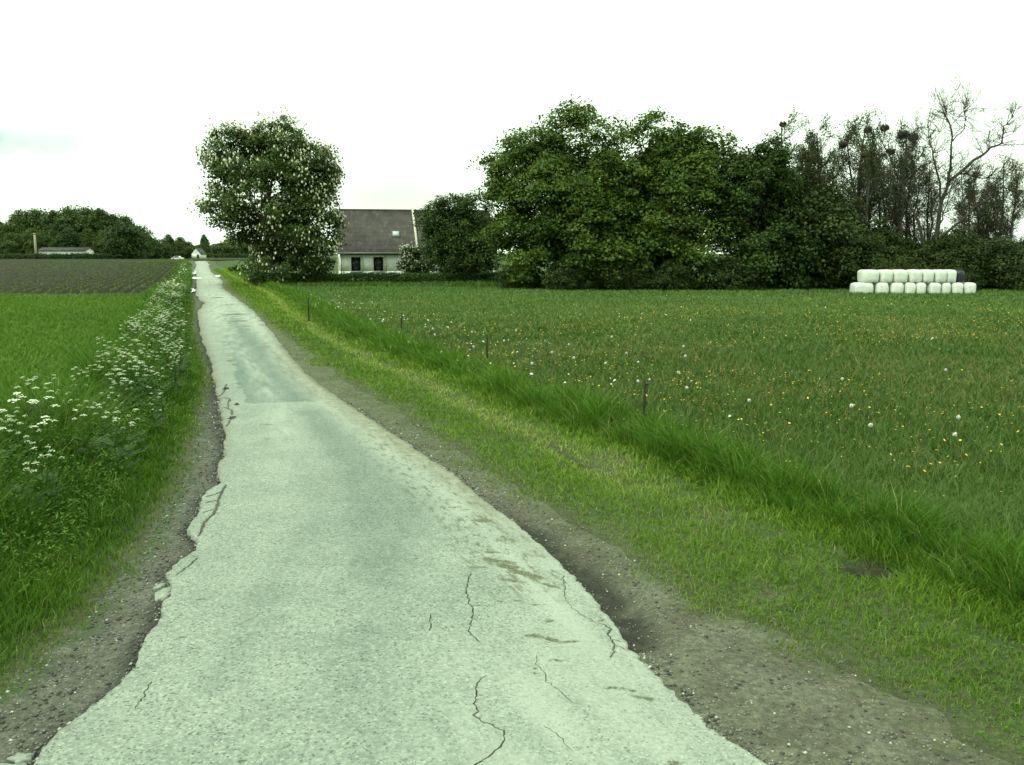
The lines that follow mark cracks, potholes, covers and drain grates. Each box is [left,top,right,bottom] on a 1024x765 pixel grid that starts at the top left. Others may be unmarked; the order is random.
crack [219,384,233,426]
crack [198,484,227,536]
crack [465,571,482,644]
crack [472,676,505,765]
crack [563,575,625,658]
